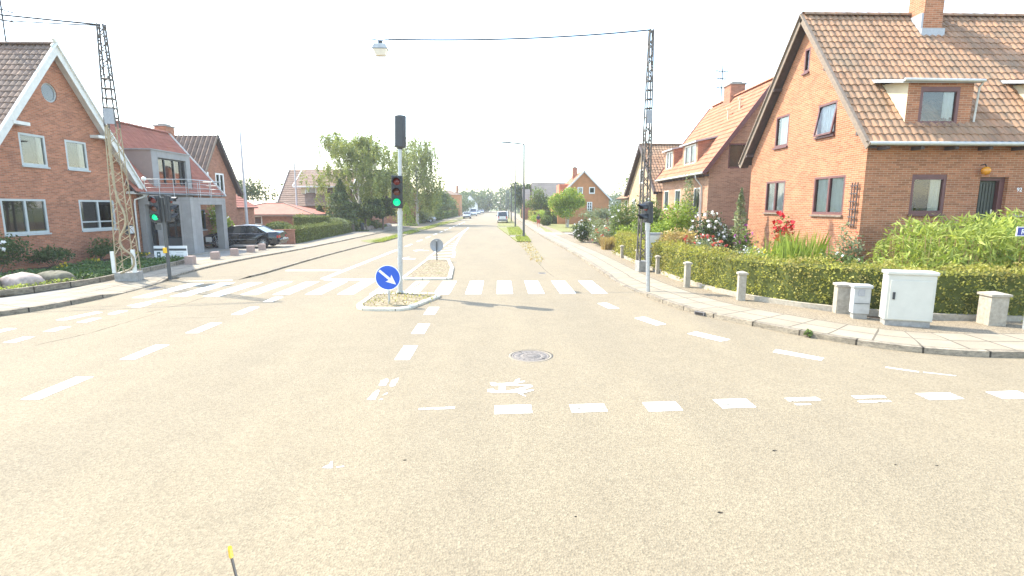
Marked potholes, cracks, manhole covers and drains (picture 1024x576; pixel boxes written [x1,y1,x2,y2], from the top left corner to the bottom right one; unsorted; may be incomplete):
manhole cover [508,350,553,362]
